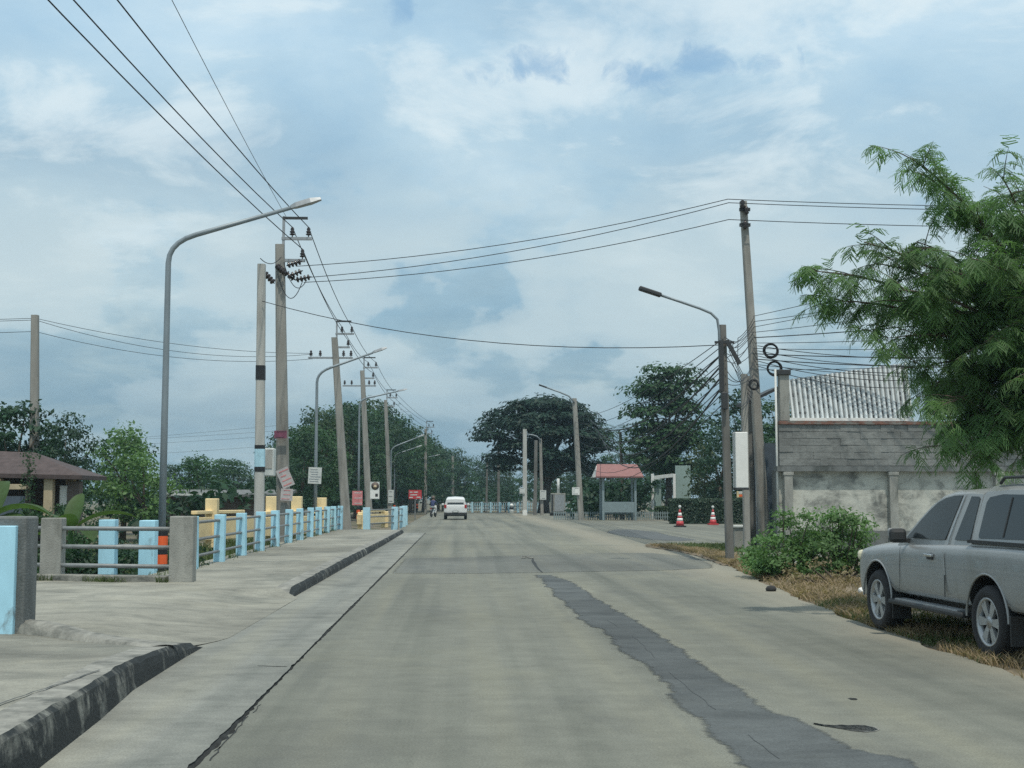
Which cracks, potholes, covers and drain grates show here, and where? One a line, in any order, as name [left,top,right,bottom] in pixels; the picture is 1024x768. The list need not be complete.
crack [521,556,542,572]
crack [609,621,778,758]
pothole [813,723,880,732]
